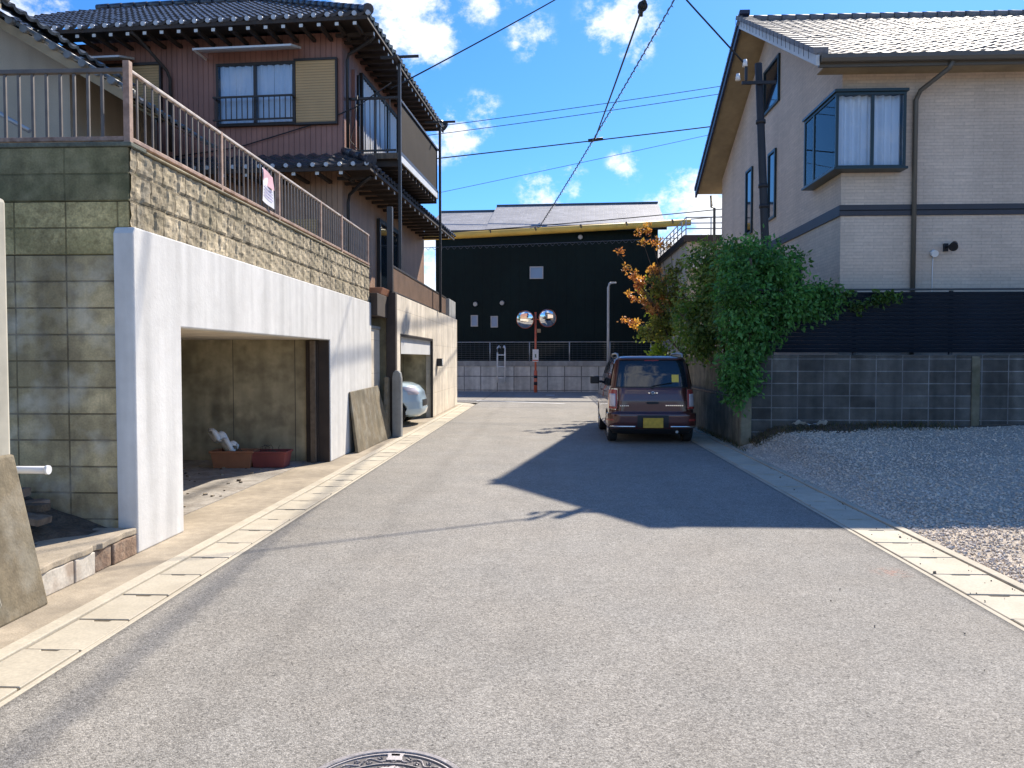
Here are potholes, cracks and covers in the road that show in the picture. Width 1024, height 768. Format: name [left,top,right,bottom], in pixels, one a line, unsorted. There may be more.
manhole cover [318,749,459,768]
